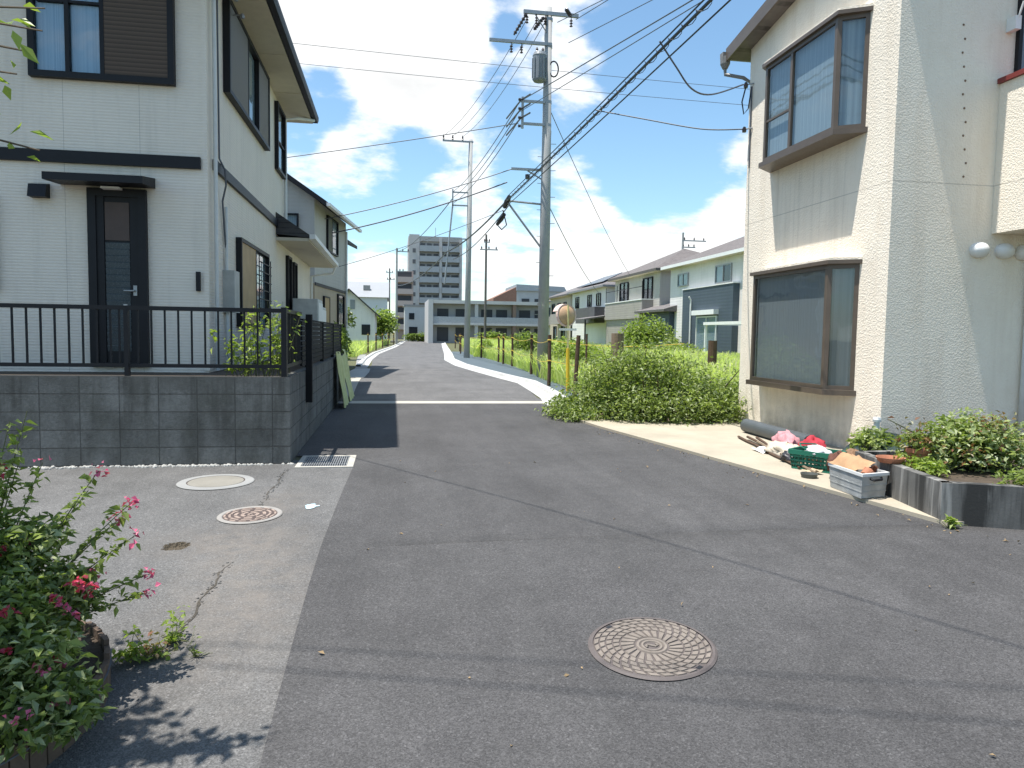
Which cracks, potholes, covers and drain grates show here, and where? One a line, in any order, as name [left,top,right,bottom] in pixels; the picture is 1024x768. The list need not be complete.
crack [258,469,289,505]
crack [163,562,233,651]
manhole cover [176,474,255,490]
manhole cover [588,617,718,681]
manhole cover [217,506,283,524]
drain grate [294,455,356,468]
